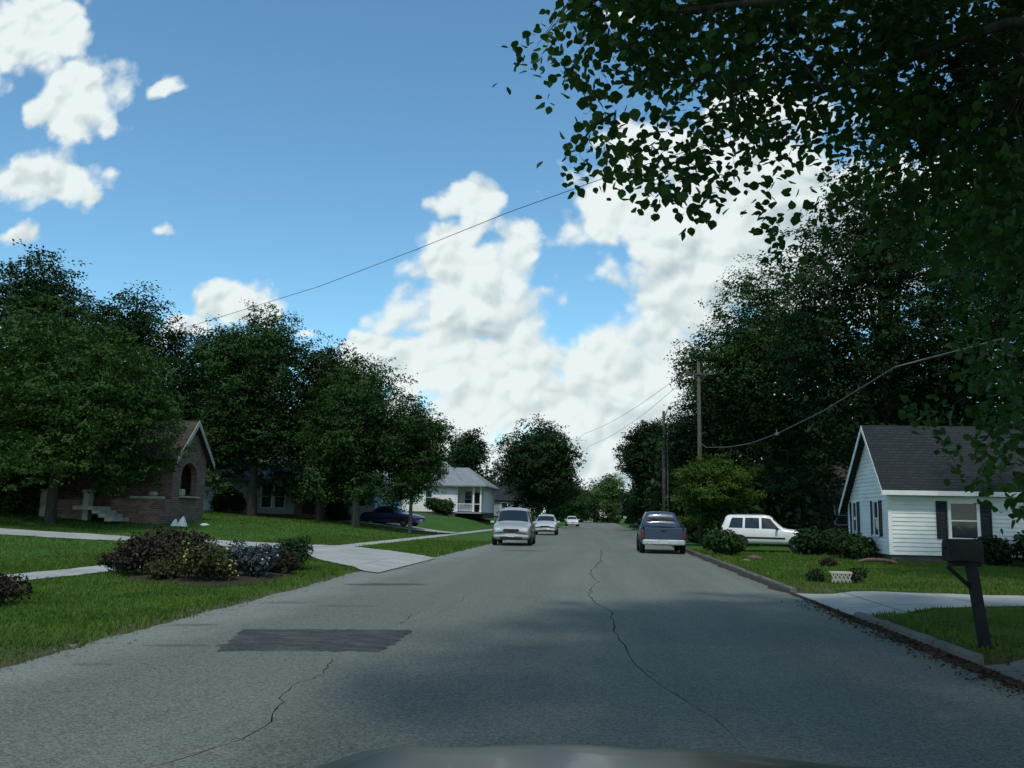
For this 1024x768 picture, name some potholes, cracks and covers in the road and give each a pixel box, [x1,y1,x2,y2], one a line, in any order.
crack [148,657,333,768]
crack [588,550,745,749]
